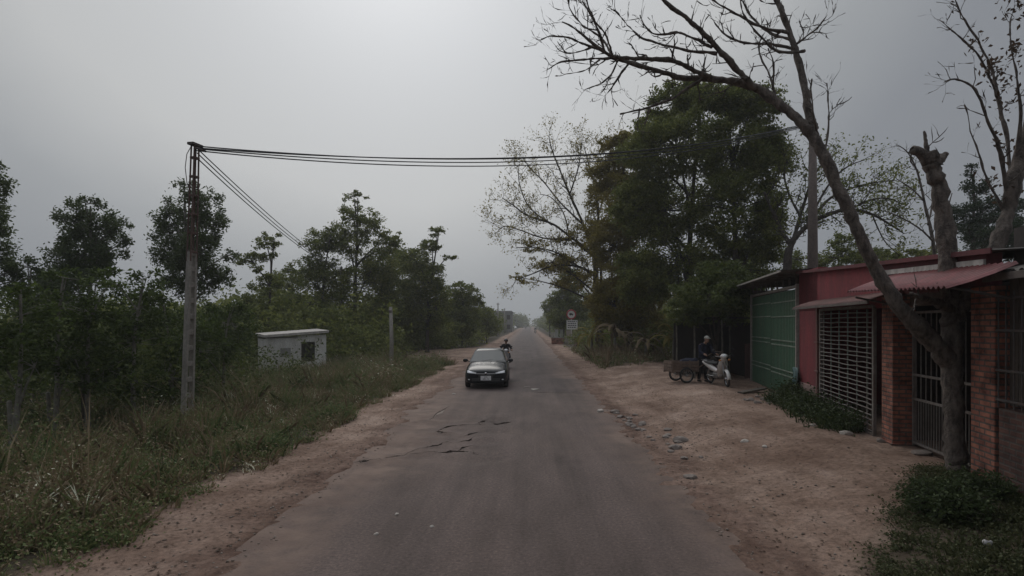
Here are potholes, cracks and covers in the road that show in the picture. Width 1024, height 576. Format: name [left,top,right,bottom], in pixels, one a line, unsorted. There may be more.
crack [358,408,488,462]
